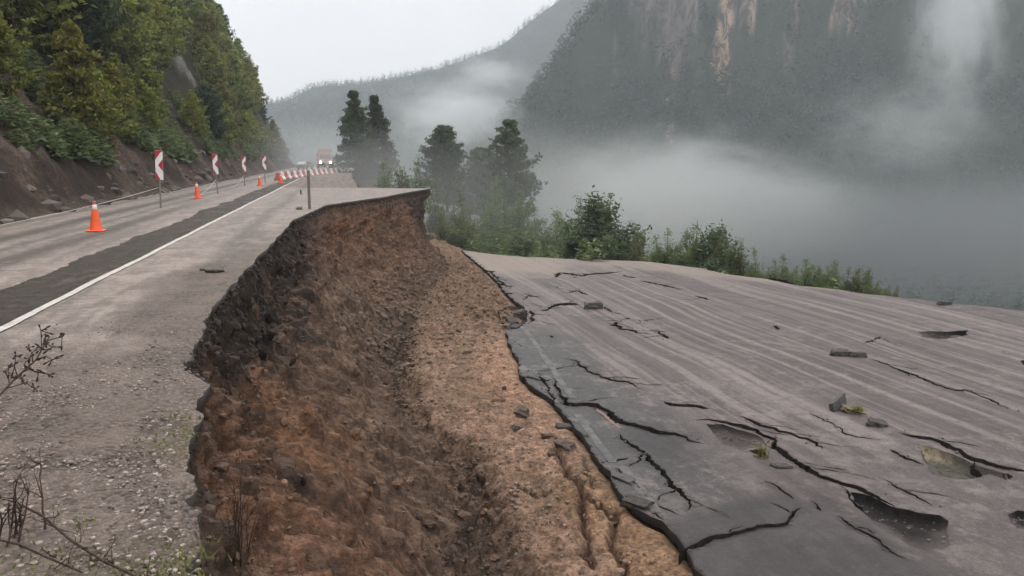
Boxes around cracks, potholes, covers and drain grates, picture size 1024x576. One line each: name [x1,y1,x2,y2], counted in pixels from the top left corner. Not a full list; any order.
pothole [851,493,950,551]
pothole [707,424,765,450]
pothole [1008,511,1024,529]
crack [522,359,1024,564]
crack [482,270,677,324]
pothole [919,330,968,339]
pothole [918,445,1008,480]
crack [603,307,669,339]
